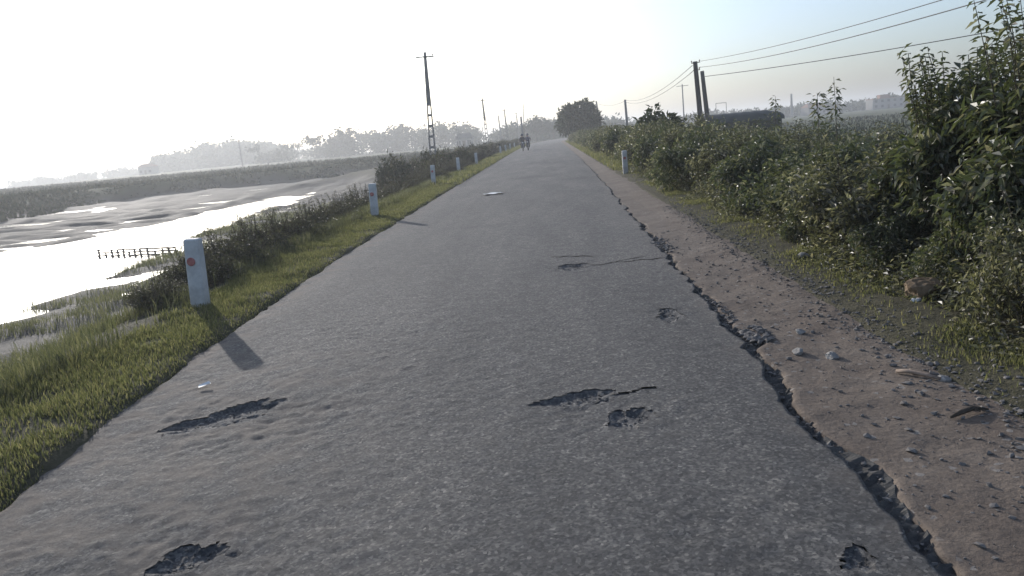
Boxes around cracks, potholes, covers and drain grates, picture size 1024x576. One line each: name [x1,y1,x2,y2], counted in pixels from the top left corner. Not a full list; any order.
pothole [840,544,878,574]
pothole [528,389,622,409]
pothole [607,407,658,430]
pothole [558,263,590,272]
pothole [657,308,685,323]
crack [620,199,957,576]
pothole [157,397,287,437]
pothole [144,542,231,576]
